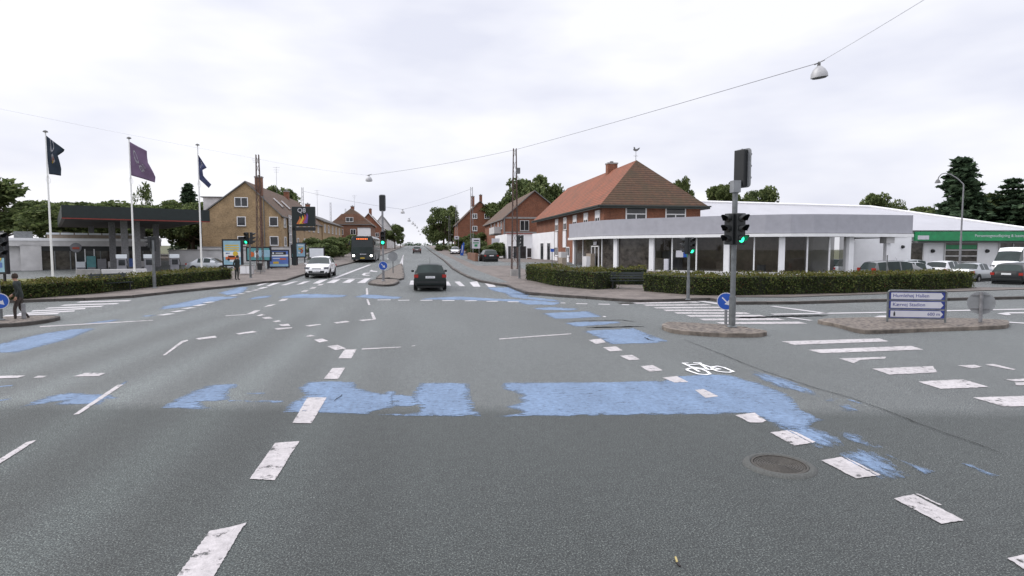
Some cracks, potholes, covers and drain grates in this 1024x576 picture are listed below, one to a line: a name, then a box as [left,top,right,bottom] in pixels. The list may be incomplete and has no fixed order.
manhole cover [742,453,818,480]
